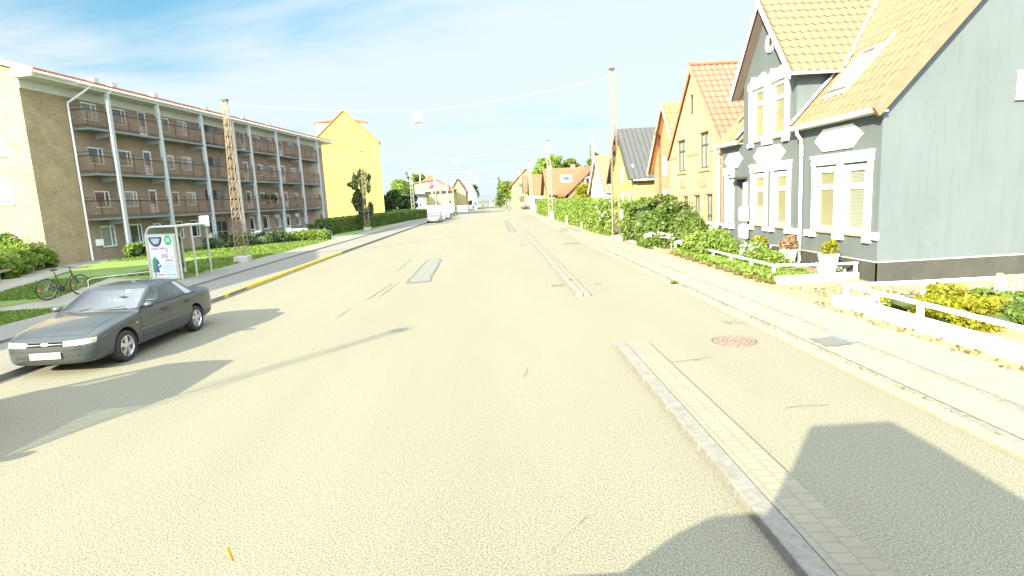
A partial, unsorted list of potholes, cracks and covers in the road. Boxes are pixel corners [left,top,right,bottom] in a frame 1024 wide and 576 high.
manhole cover [711,335,758,347]
